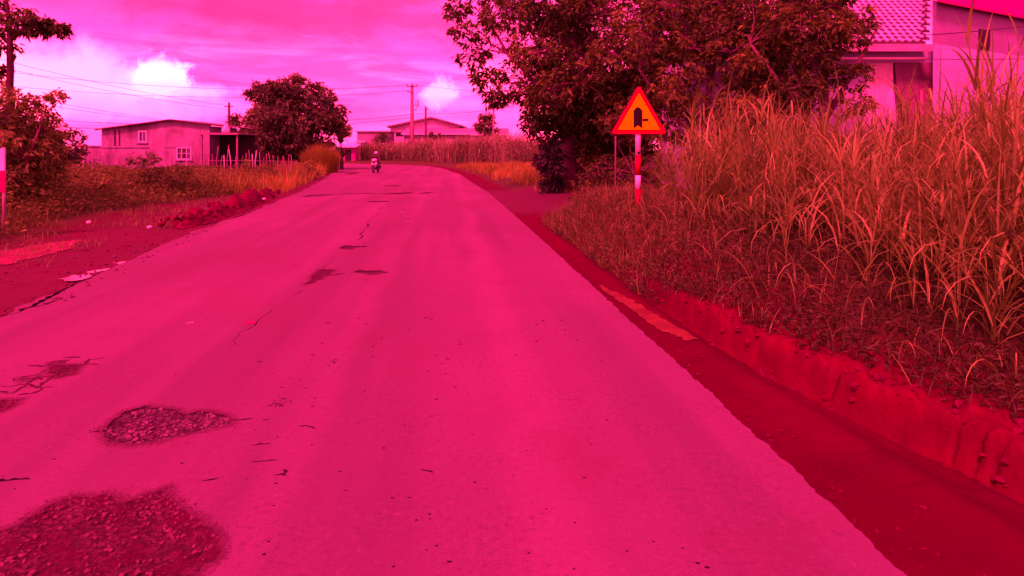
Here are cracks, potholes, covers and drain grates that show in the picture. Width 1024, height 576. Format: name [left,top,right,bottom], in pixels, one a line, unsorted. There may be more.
pothole [77,405,248,449]
pothole [0,485,245,576]
